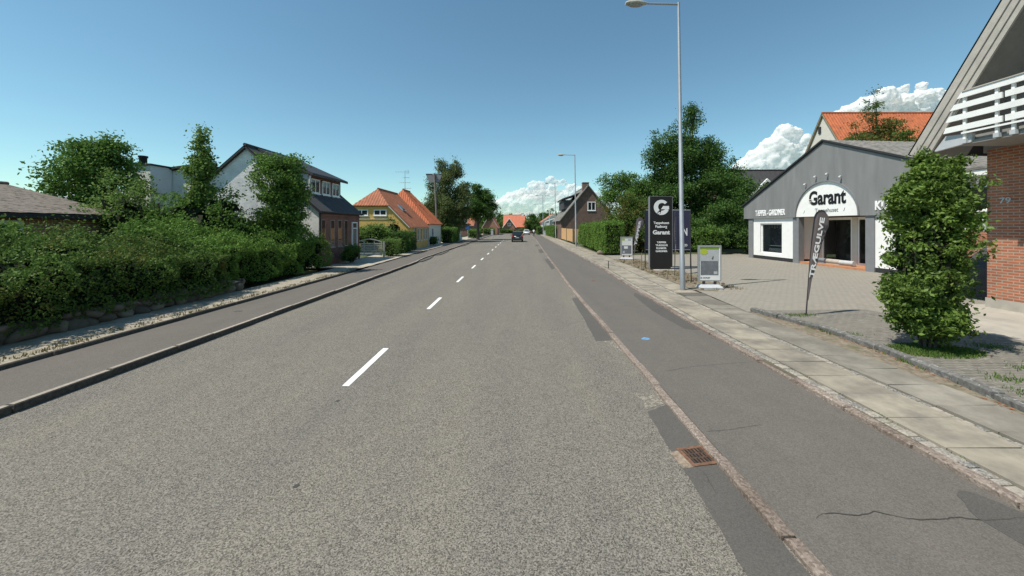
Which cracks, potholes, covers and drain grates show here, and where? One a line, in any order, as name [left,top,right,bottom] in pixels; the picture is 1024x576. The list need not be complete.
crack [816,510,1023,520]
drain grate [670,445,717,468]
